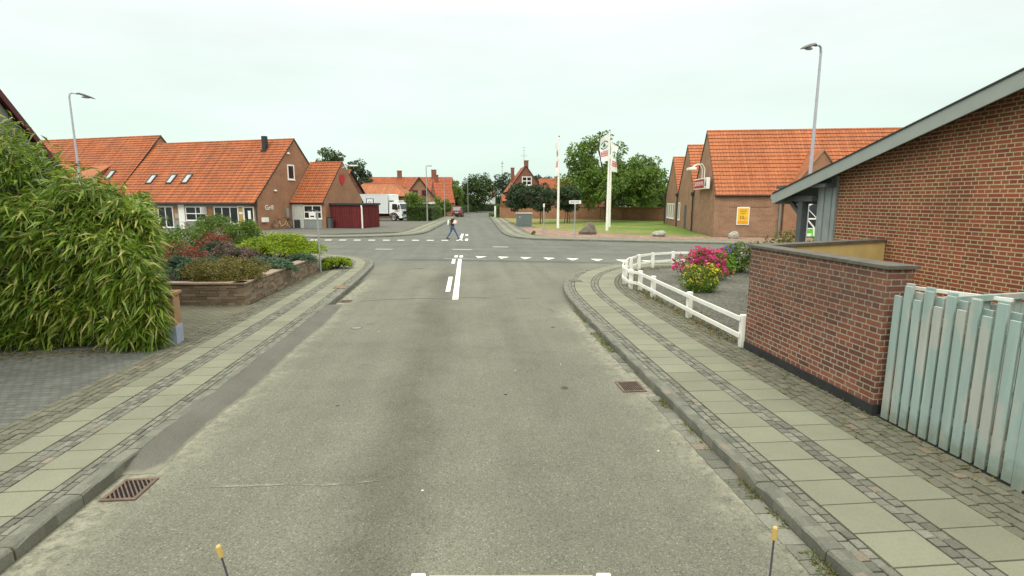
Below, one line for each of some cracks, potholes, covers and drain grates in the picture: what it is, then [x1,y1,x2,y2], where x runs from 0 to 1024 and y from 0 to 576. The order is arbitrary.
drain grate [615,381,647,392]
drain grate [99,477,159,502]
